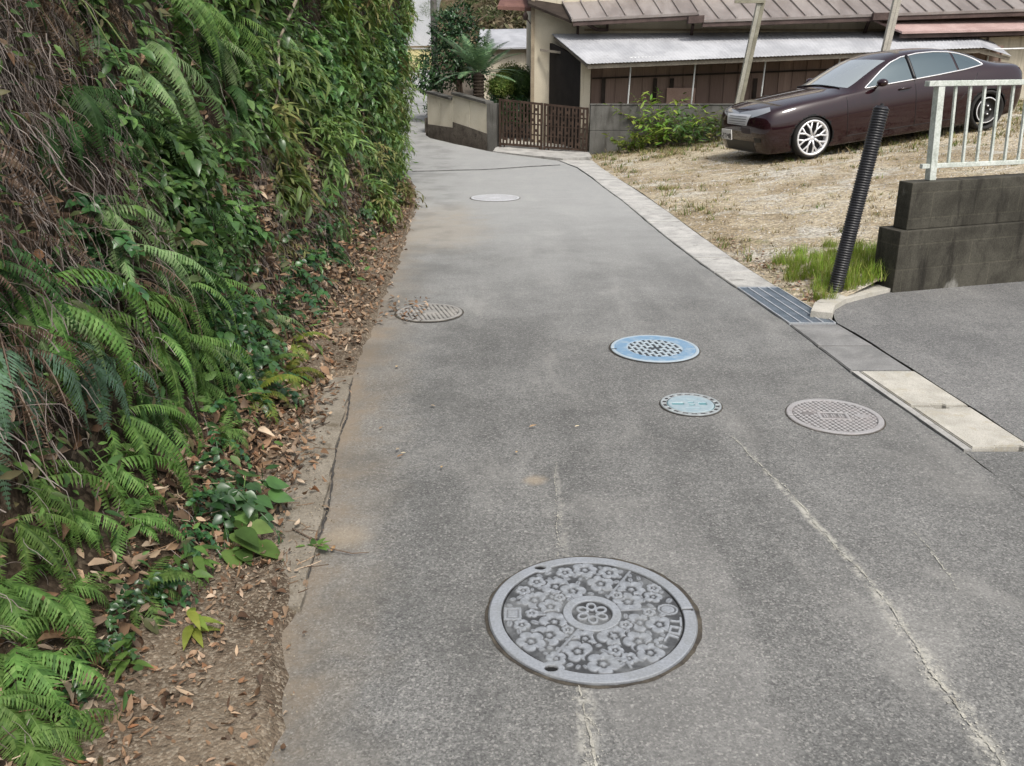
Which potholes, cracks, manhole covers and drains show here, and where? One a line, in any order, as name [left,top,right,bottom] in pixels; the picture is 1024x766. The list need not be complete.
crack [571,685,607,766]
manhole cover [659,393,723,417]
manhole cover [609,335,700,364]
crack [554,462,562,556]
drain grate [737,287,836,326]
manhole cover [470,194,520,202]
crack [732,437,1012,766]
manhole cover [485,556,702,689]
manhole cover [785,399,886,436]
crack [308,381,353,578]
